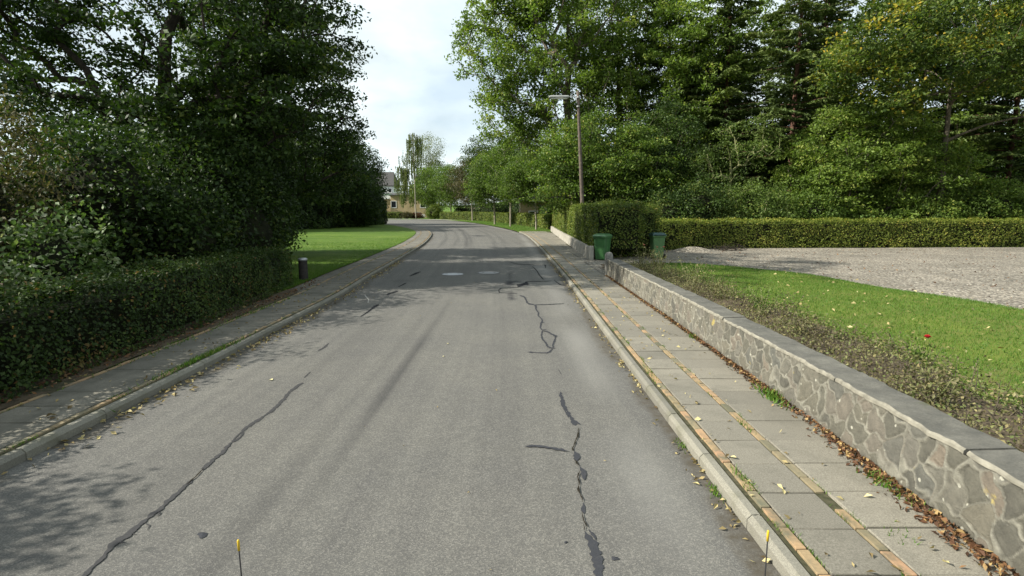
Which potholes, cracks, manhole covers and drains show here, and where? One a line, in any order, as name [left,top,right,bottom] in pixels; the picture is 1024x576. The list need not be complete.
crack [361,272,419,316]
